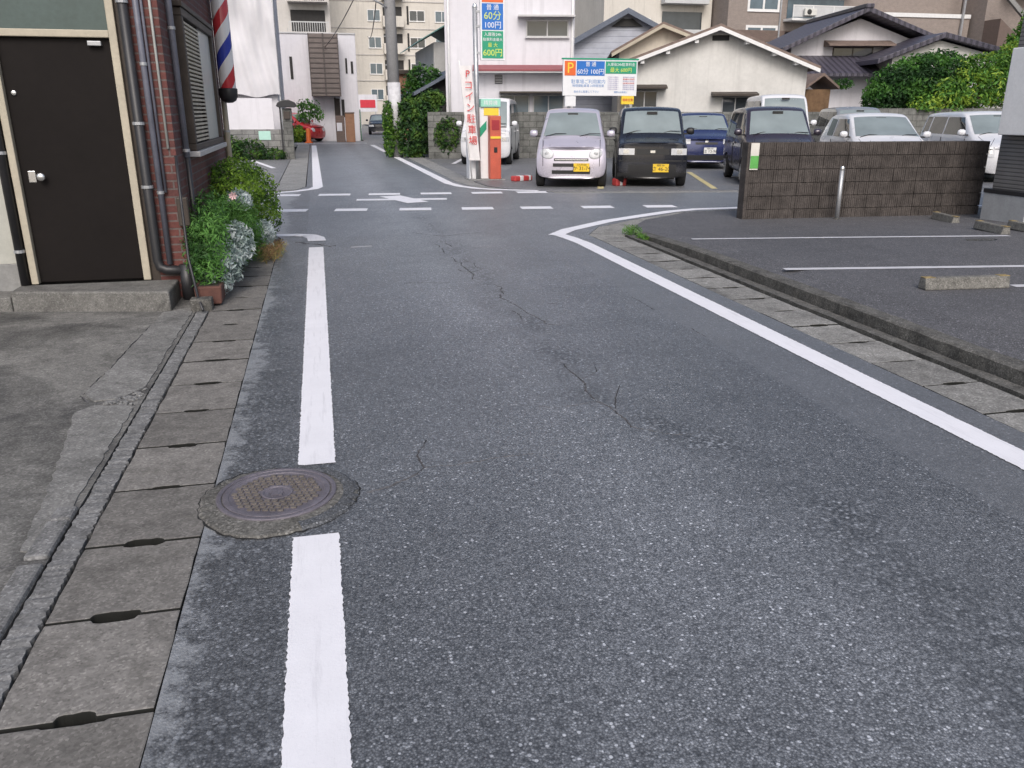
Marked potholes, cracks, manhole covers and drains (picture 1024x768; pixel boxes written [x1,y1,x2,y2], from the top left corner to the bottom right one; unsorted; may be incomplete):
crack [540,364,684,435]
manhole cover [197,465,361,540]
crack [367,440,534,493]
crack [417,233,561,325]
